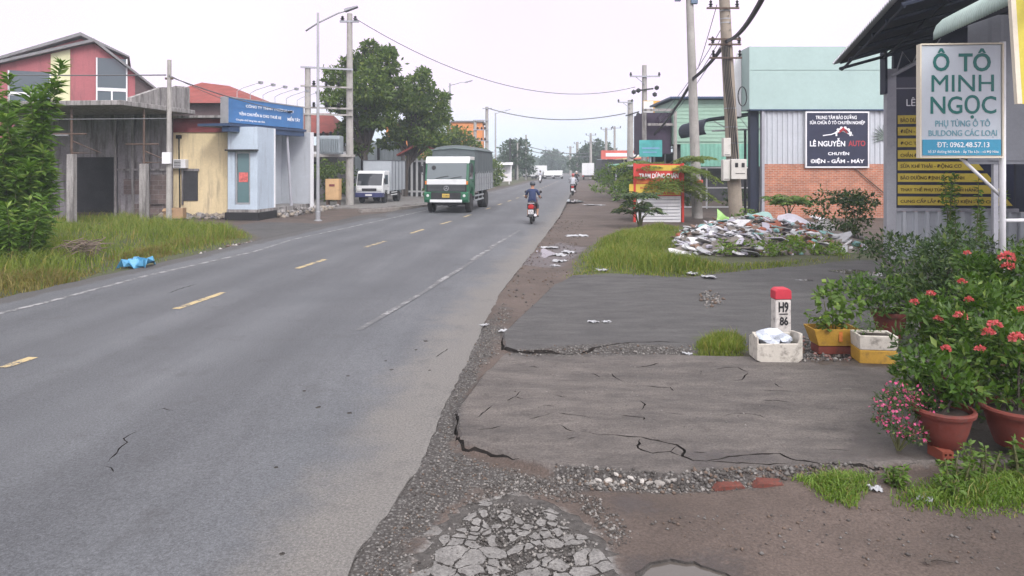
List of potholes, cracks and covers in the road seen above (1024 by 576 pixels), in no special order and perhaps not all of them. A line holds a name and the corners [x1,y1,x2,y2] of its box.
crack [410,494,620,576]
crack [501,338,690,368]
crack [107,431,137,472]
crack [454,386,914,471]
pothole [635,559,730,576]
